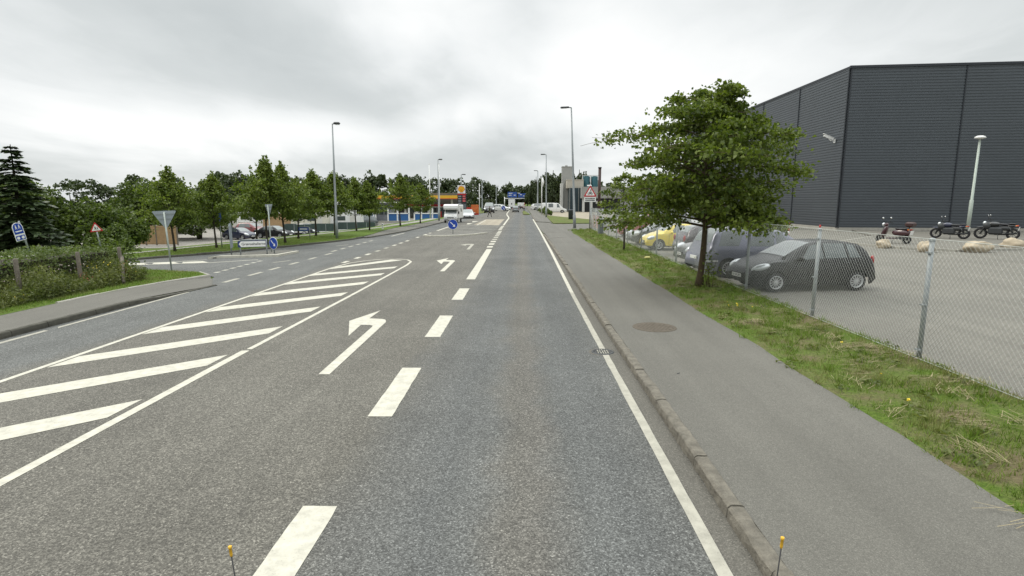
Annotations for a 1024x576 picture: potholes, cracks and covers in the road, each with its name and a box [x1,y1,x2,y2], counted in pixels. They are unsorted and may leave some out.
manhole cover [632,322,677,332]
